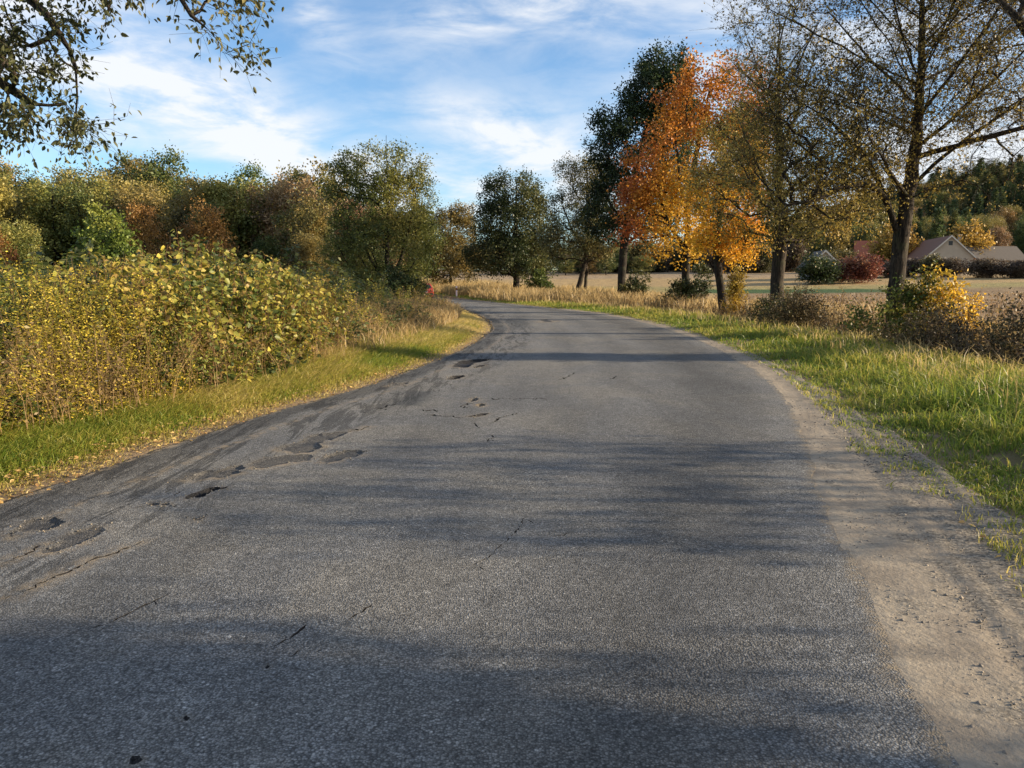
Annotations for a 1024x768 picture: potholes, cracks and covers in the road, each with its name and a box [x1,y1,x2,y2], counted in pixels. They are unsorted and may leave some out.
pothole [453,359,489,368]
pothole [276,432,348,454]
pothole [249,454,313,468]
pothole [42,526,106,553]
crack [423,398,543,442]
crack [273,622,310,656]
crack [87,594,168,630]
pothole [185,486,228,499]
crack [3,541,142,599]
pothole [318,450,365,463]
crack [464,518,533,570]
